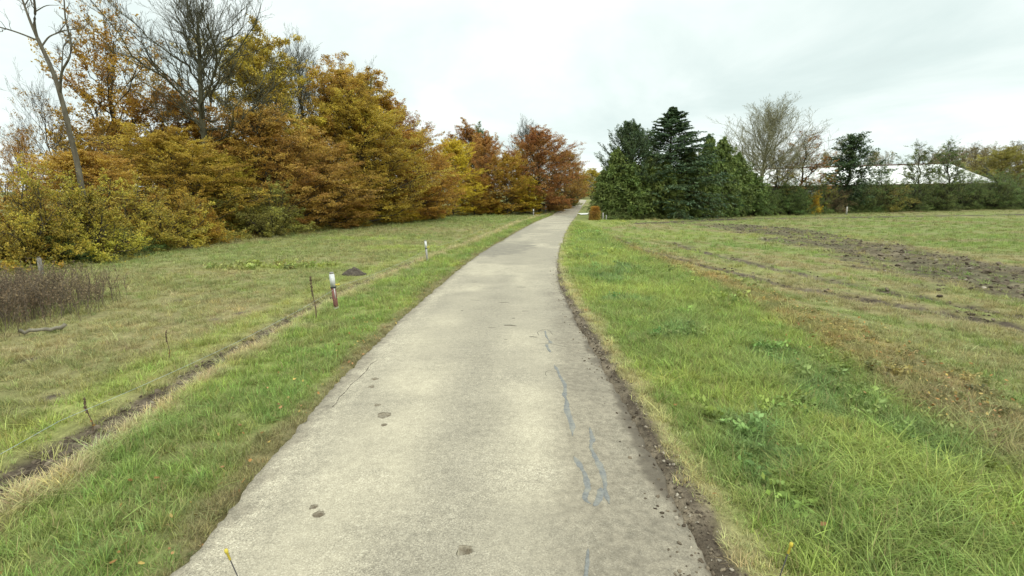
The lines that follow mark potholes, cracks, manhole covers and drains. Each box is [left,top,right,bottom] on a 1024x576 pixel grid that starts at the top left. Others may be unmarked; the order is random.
pothole [457,545,474,555]
